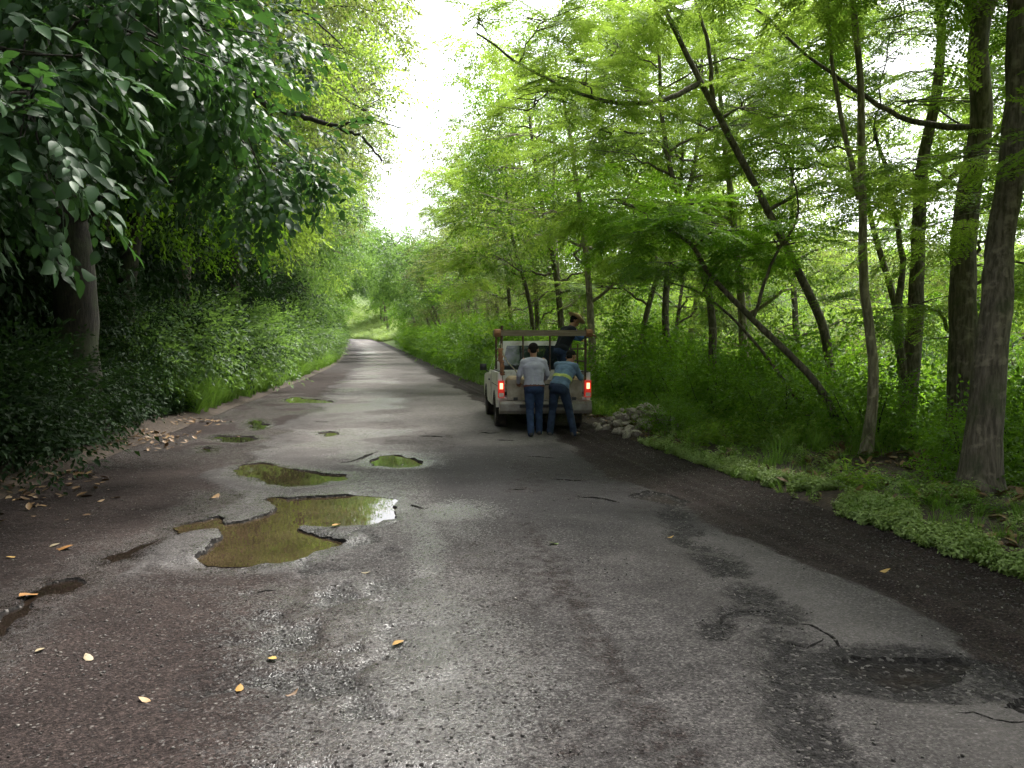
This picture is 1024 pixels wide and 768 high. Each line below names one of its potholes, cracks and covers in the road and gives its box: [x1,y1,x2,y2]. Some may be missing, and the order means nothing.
crack [717,610,846,653]
pothole [832,655,978,694]
pothole [233,462,348,487]
pothole [245,419,270,430]
pothole [628,490,690,507]
pothole [210,435,259,443]
crack [556,479,620,503]
pothole [369,455,423,468]
pothole [173,494,398,568]
crack [957,711,1024,723]
